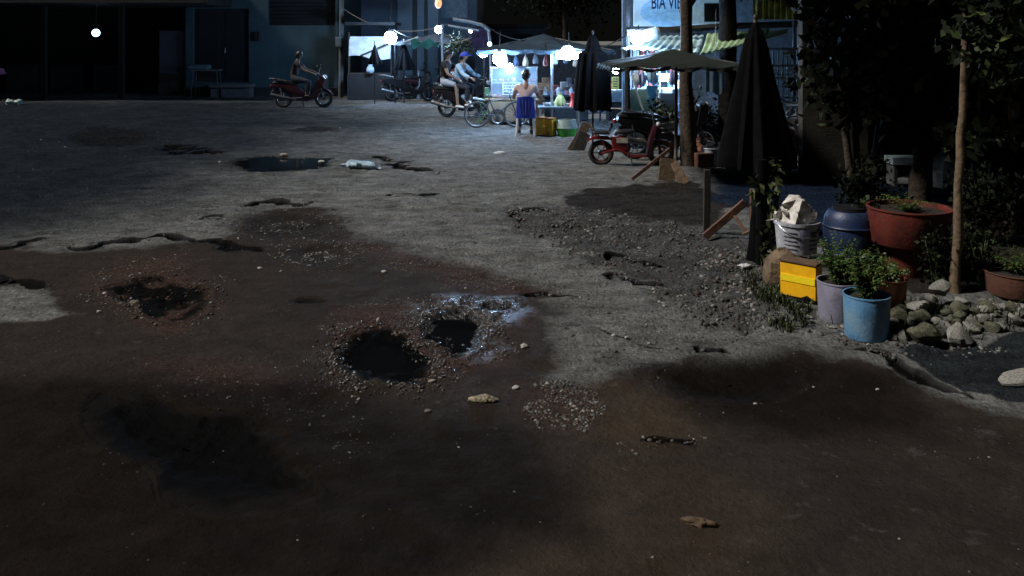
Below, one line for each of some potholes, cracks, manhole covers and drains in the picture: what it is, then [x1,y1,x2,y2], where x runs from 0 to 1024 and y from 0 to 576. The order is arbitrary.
pothole [77,265,234,336]
pothole [398,293,528,373]
pothole [295,312,468,404]
crack [0,198,313,253]
pothole [192,152,353,178]
crack [640,434,699,448]
